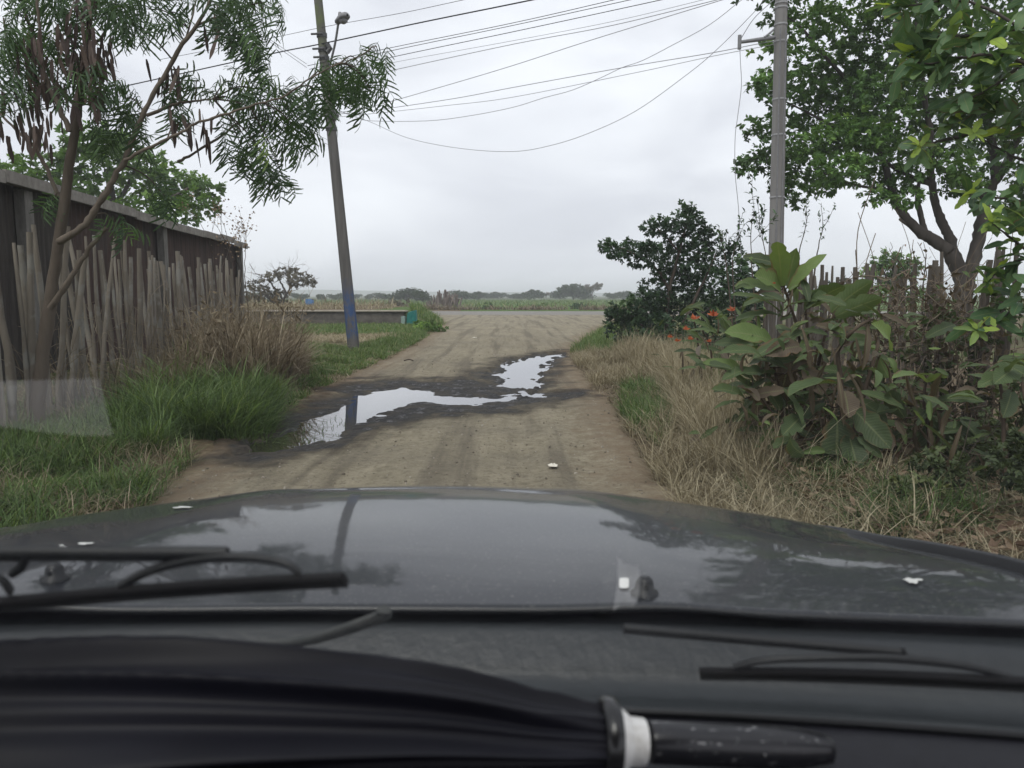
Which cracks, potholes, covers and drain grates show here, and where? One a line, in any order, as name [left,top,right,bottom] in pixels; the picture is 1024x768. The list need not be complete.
pothole [347,350,585,414]
